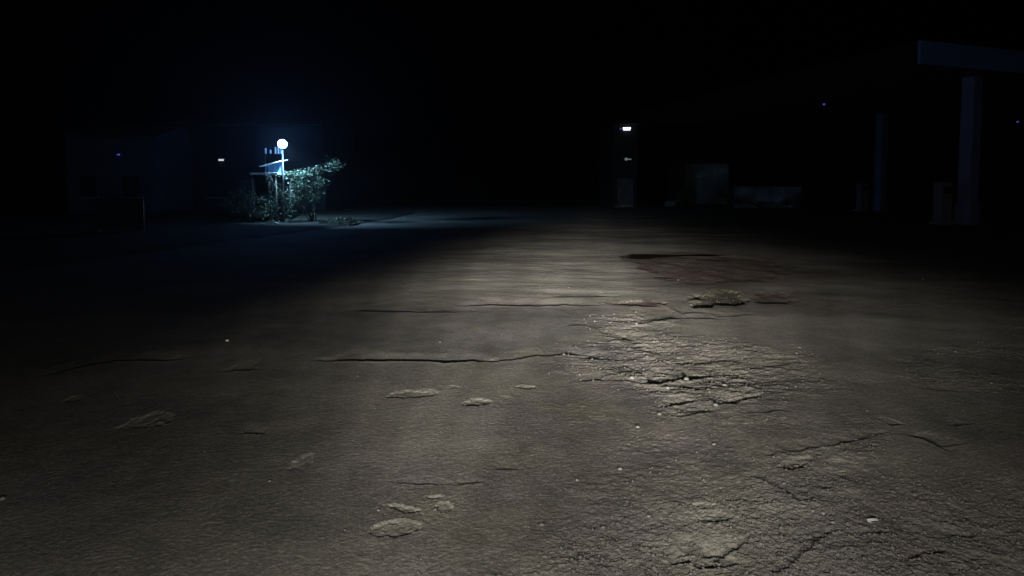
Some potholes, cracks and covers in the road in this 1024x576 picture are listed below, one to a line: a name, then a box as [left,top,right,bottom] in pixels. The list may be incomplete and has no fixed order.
pothole [366,518,424,539]
pothole [384,502,424,514]
pothole [686,288,752,309]
pothole [113,410,178,430]
crack [905,531,981,561]
crack [671,542,749,569]
crack [323,295,756,384]
pothole [461,397,493,407]
pothole [384,388,441,399]
crack [665,399,782,417]
crack [770,423,972,455]
crack [48,356,196,375]
